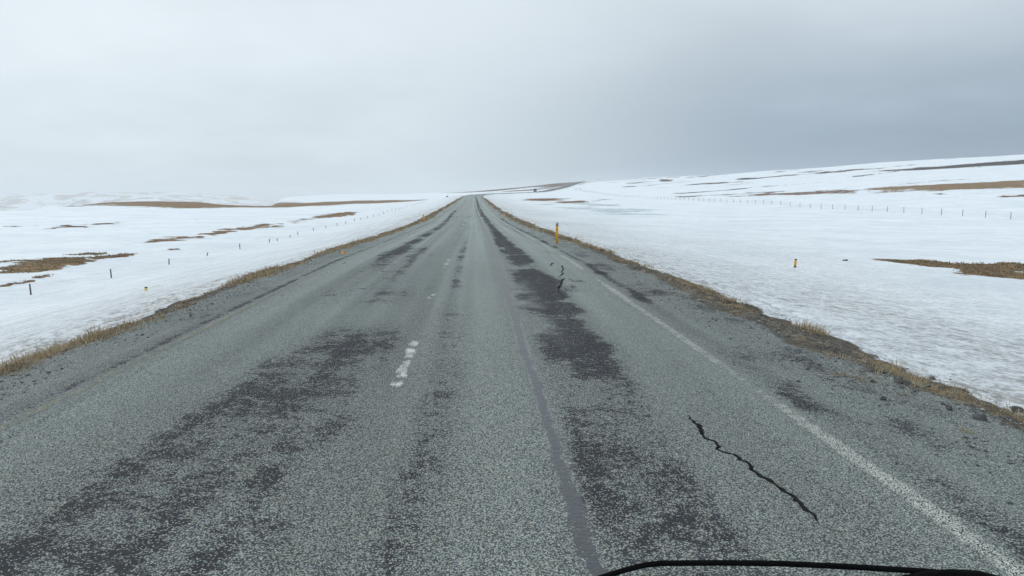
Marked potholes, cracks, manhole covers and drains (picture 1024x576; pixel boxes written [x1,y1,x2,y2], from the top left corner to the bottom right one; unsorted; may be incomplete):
crack [546,251,575,299]
